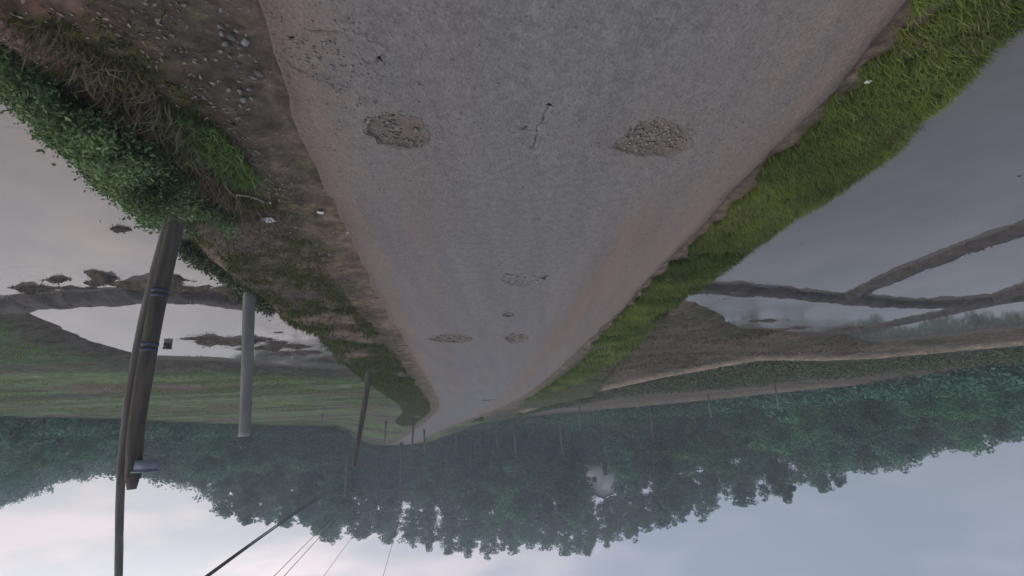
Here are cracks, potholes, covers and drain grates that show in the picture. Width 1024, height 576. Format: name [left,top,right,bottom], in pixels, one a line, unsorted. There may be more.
pothole [499,274,548,286]
pothole [604,116,697,159]
crack [522,105,555,148]
pothole [503,334,529,344]
pothole [360,112,430,150]
pothole [425,334,476,343]
